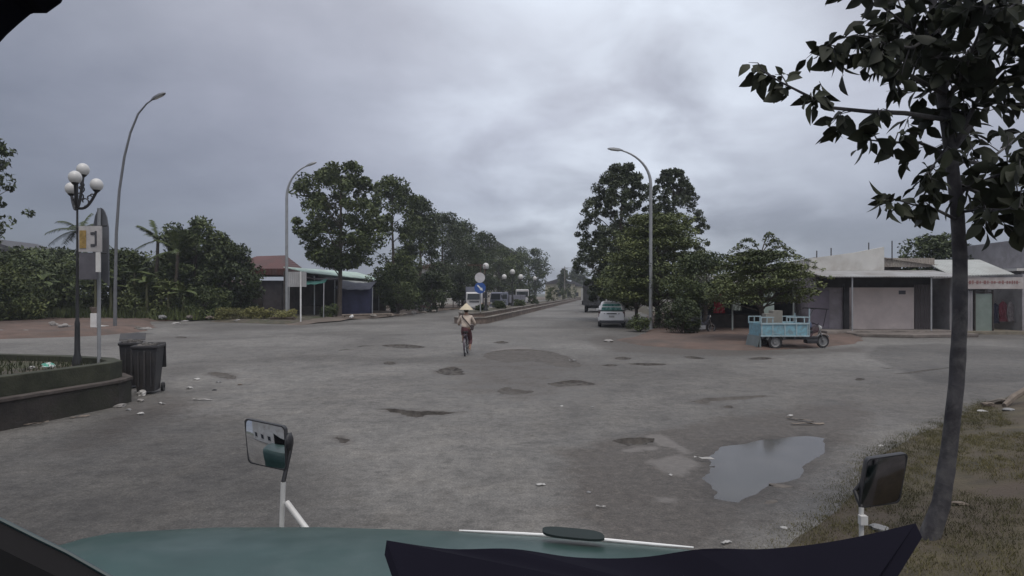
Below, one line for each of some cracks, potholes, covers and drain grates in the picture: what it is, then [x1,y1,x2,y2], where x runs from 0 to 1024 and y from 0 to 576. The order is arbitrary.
pothole [385,409,457,418]
pothole [207,372,236,380]
pothole [497,387,534,395]
pothole [613,437,655,446]
pothole [436,367,464,375]
